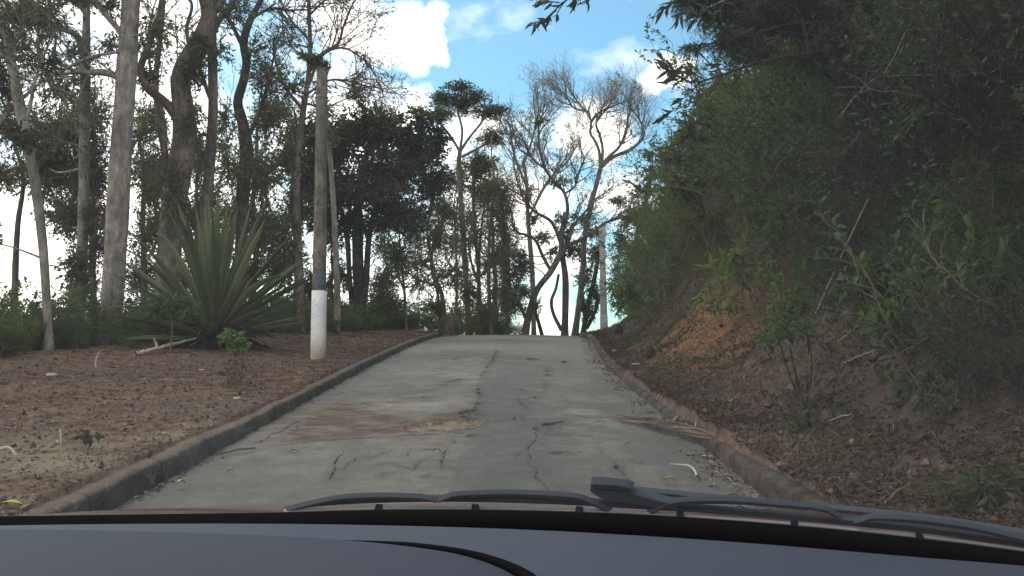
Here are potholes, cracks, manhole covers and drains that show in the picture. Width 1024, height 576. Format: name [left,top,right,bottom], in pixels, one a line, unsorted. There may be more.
crack [249,420,468,482]
crack [413,350,650,492]
